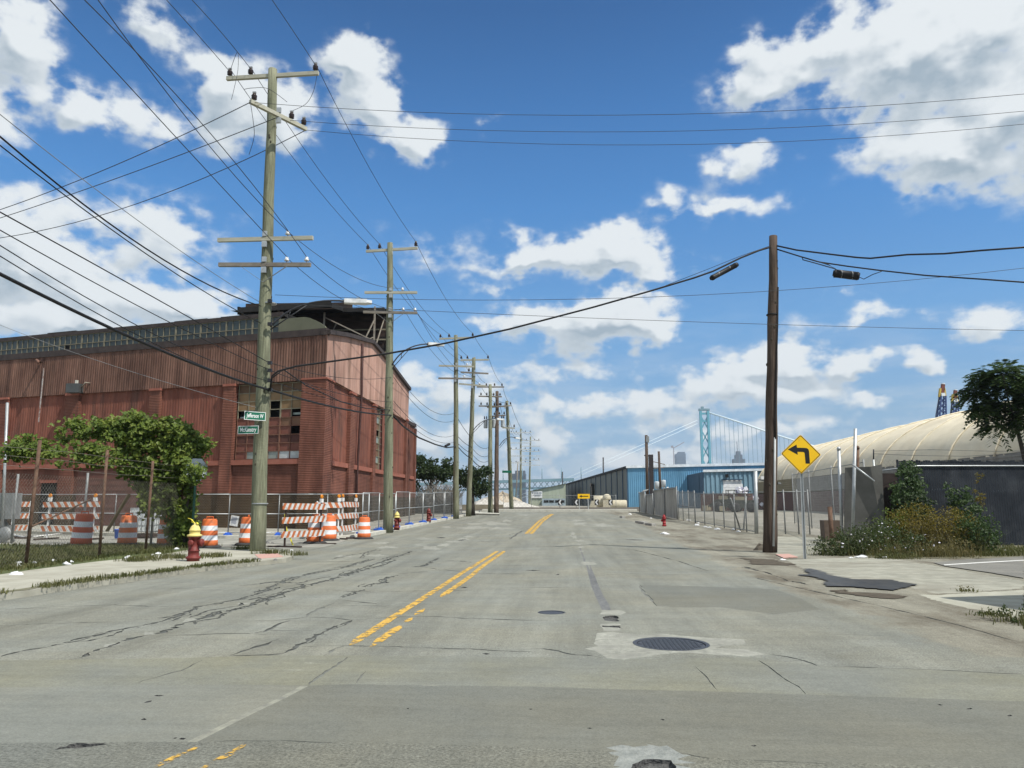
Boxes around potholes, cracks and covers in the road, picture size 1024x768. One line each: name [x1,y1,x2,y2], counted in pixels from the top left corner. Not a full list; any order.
crack [2,549,601,660]
manhole cover [633,637,710,651]
pothole [631,759,676,768]
